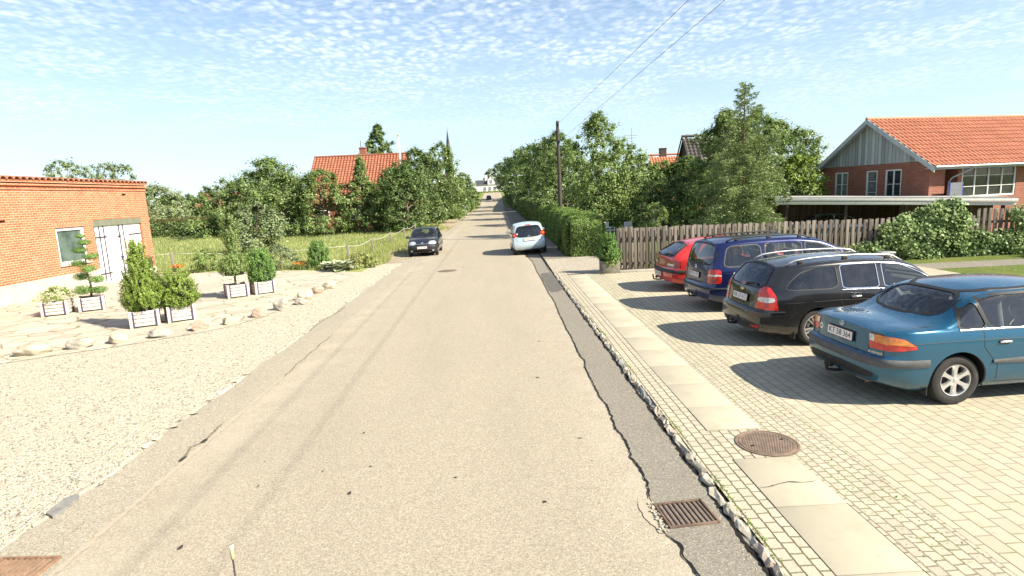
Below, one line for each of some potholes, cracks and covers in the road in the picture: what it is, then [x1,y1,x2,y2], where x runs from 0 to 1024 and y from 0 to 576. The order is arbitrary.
crack [666,534,701,576]
crack [284,307,345,376]
drain grate [0,555,62,576]
drain grate [653,498,721,529]
crack [183,422,224,457]
manhole cover [735,430,801,458]
